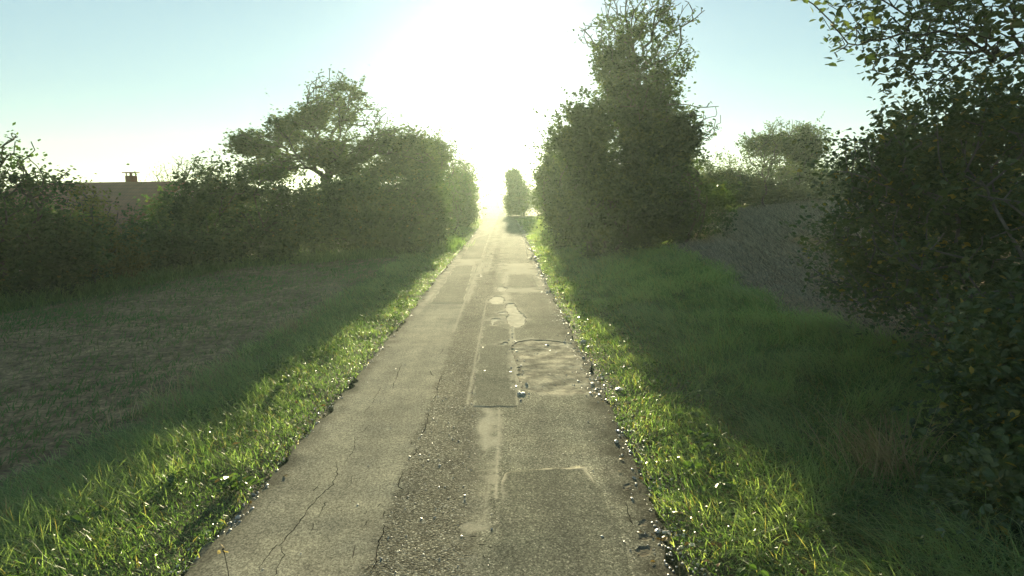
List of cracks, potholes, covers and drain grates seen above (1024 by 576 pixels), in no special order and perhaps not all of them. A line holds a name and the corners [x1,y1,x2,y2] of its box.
crack [259,366,401,576]
